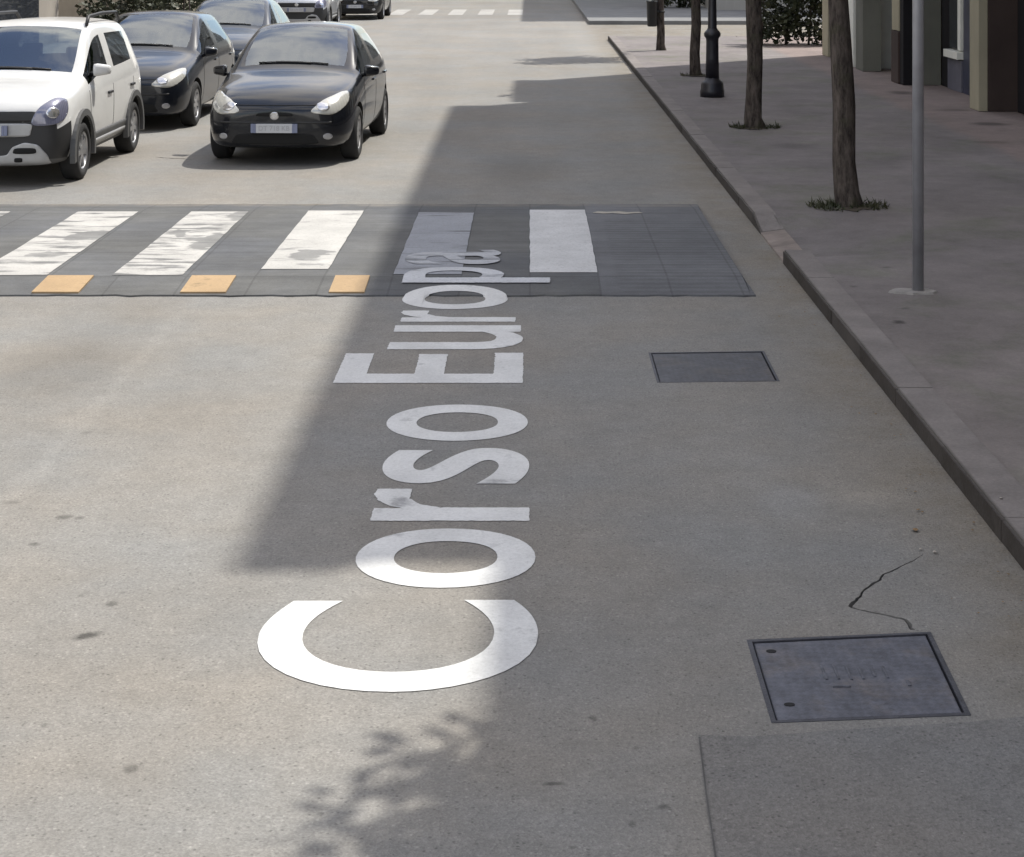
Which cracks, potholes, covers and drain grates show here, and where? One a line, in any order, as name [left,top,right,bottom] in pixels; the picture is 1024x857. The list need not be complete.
crack [848,554,923,630]
manhole cover [649,351,780,383]
manhole cover [747,632,971,723]
